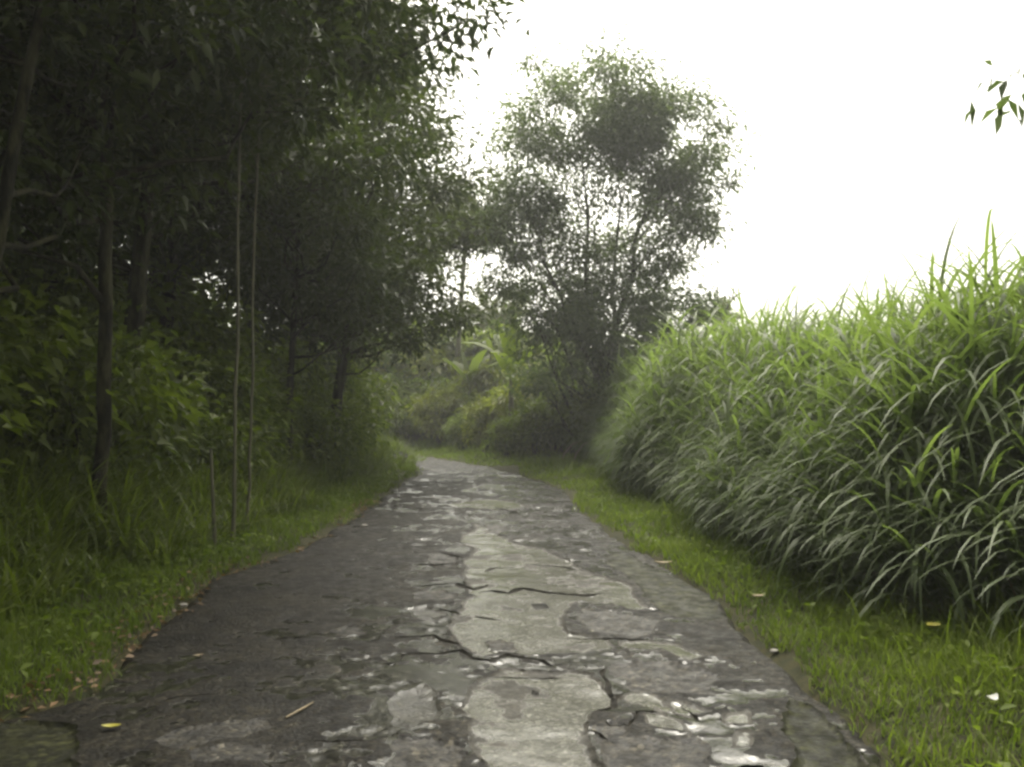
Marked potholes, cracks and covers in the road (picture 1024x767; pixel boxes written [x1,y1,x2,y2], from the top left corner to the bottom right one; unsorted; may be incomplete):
crack [583,666,657,747]
crack [381,608,646,680]
crack [392,536,603,597]
